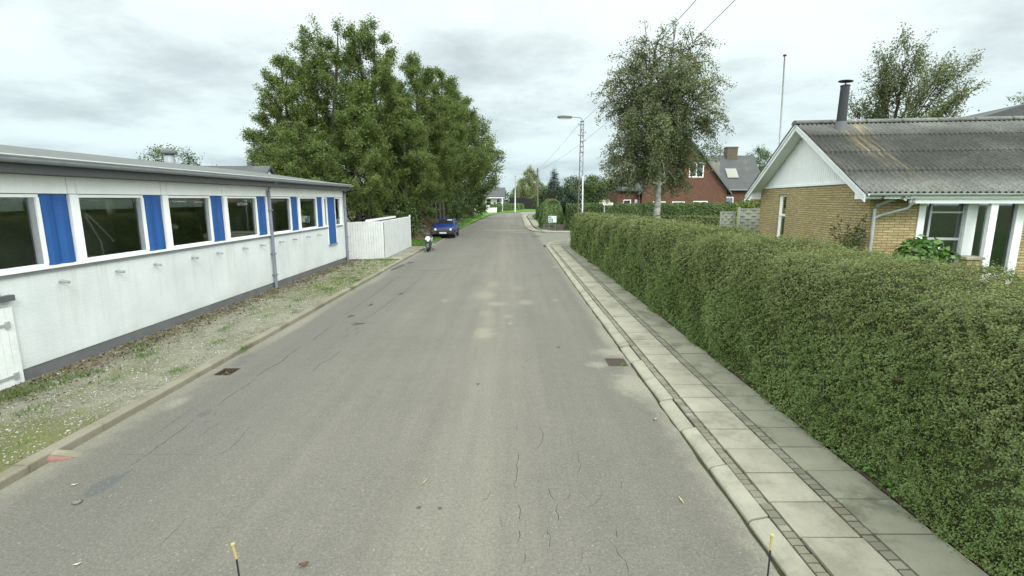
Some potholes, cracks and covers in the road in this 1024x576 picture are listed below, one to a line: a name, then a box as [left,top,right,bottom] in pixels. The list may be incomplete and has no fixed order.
crack [487,427,537,573]
crack [260,267,466,374]
drain grate [604,358,628,366]
crack [120,380,272,467]
